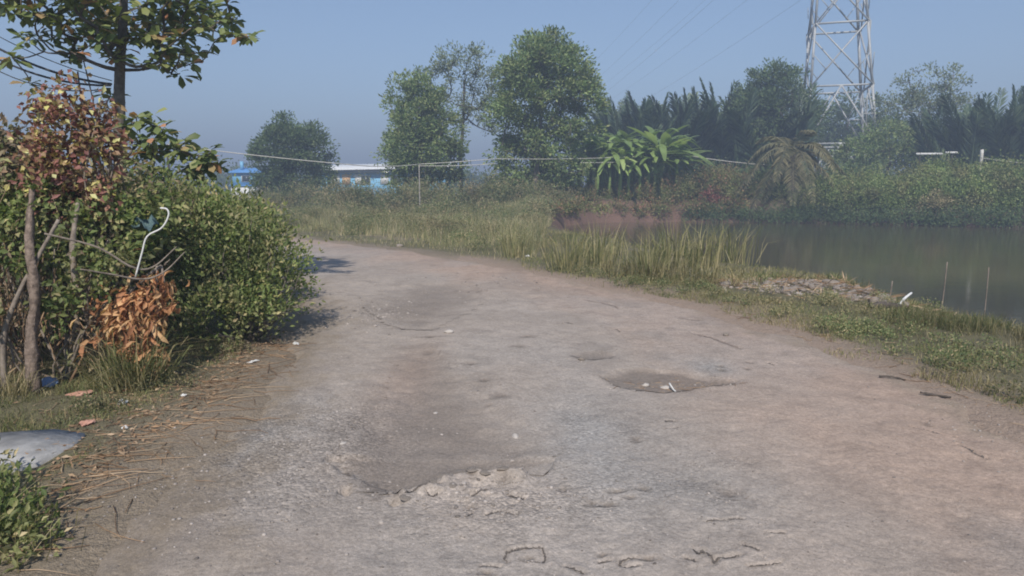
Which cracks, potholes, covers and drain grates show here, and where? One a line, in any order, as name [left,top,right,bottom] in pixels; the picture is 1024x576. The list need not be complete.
crack [681,318,741,349]
crack [684,532,784,567]
pothole [598,367,733,393]
crack [481,546,547,568]
pothole [571,350,613,360]
pothole [336,341,562,495]
